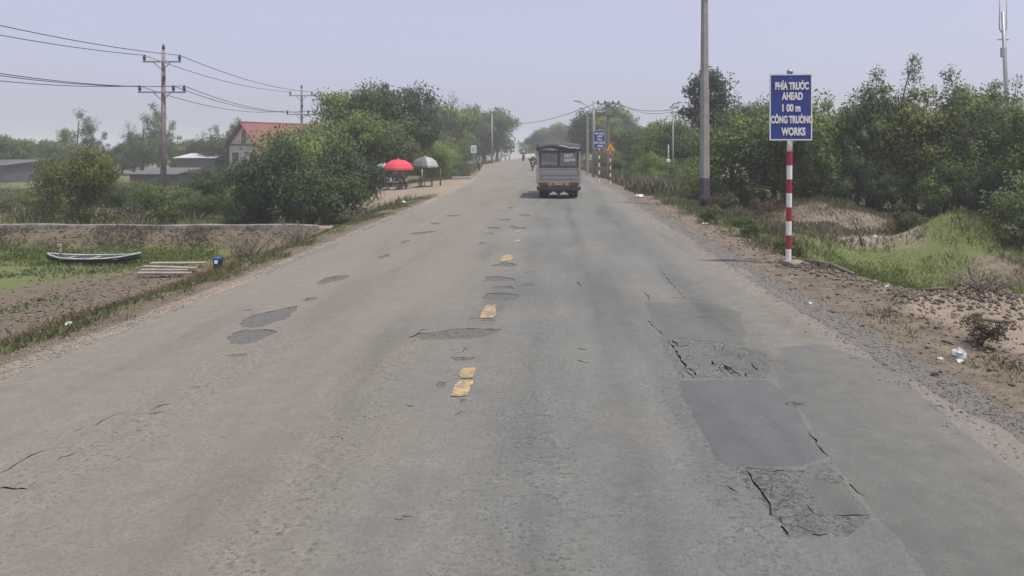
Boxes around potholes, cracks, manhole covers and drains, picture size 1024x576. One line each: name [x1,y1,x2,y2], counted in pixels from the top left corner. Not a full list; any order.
crack [645,319,758,377]
pothole [410,328,501,340]
crack [730,467,829,537]
